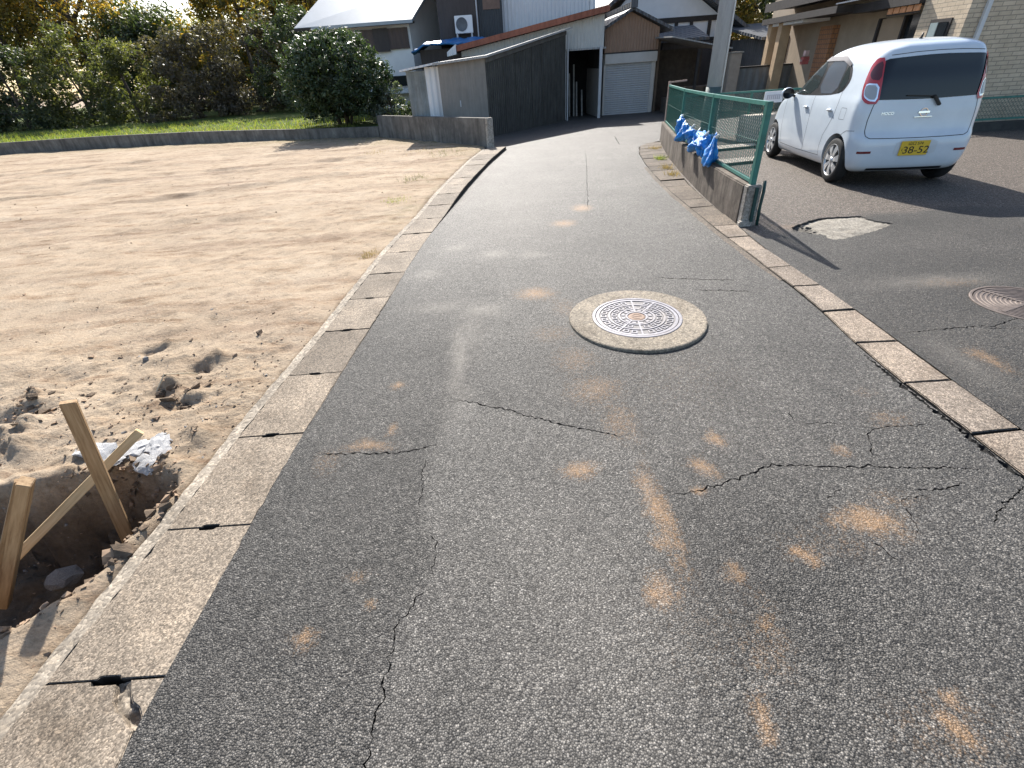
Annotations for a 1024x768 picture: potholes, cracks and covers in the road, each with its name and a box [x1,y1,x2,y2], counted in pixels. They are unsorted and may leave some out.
crack [908,320,1011,333]
crack [665,355,1024,535]
crack [312,444,437,457]
manhole cover [969,286,1024,320]
manhole cover [569,290,708,353]
crack [456,400,627,439]
